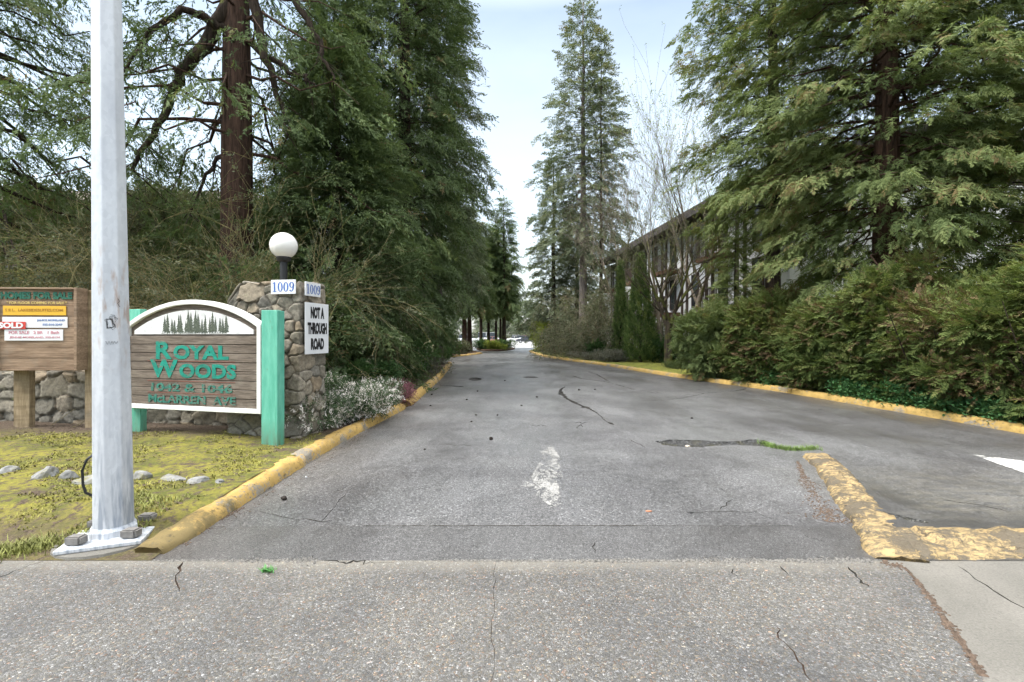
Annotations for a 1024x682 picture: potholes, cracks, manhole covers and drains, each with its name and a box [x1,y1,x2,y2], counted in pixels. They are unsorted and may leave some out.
crack [532,372,744,428]
crack [263,486,352,522]
crack [175,562,183,591]
pothole [655,439,766,447]
crack [775,625,811,681]
crack [960,567,1024,608]
